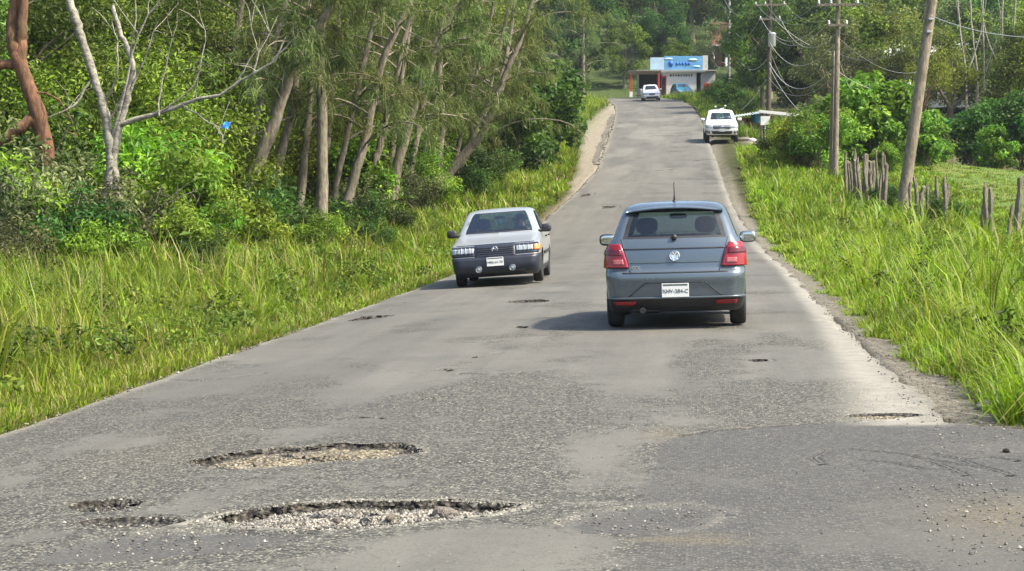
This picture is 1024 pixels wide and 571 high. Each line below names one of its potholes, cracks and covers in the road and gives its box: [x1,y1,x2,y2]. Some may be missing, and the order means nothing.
pothole [839,412,935,421]
pothole [65,516,199,531]
pothole [178,442,433,470]
pothole [59,497,155,514]
pothole [198,497,533,532]
